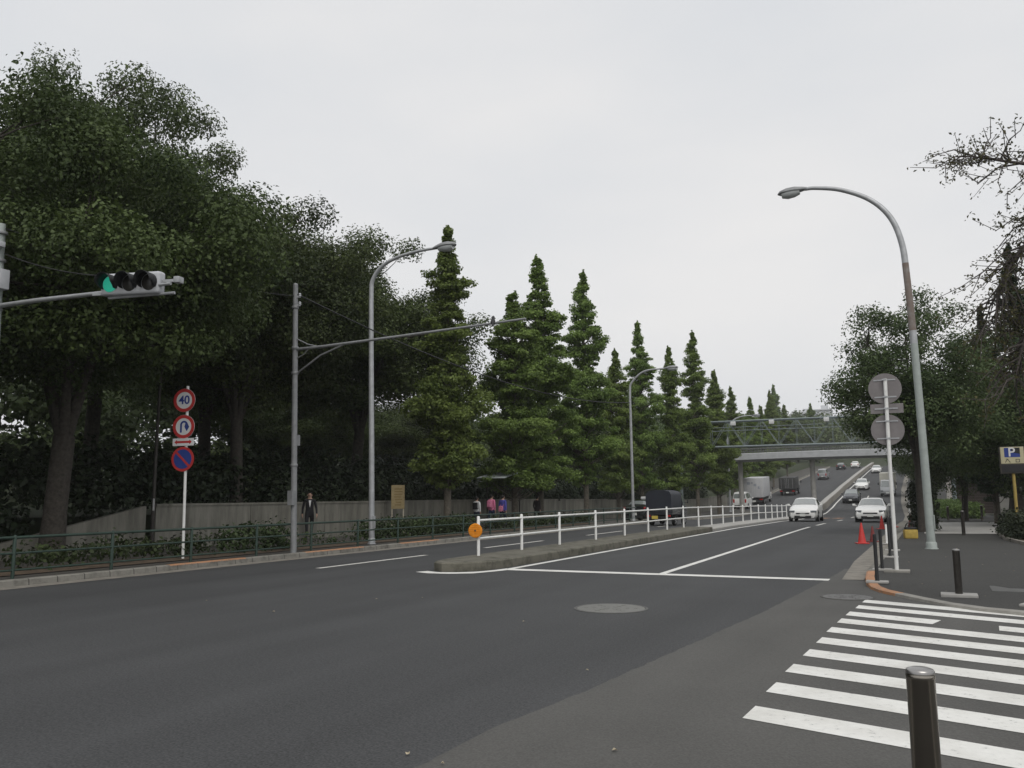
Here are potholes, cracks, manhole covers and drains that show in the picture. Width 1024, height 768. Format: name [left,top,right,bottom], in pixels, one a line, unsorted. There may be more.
manhole cover [574,603,648,614]
